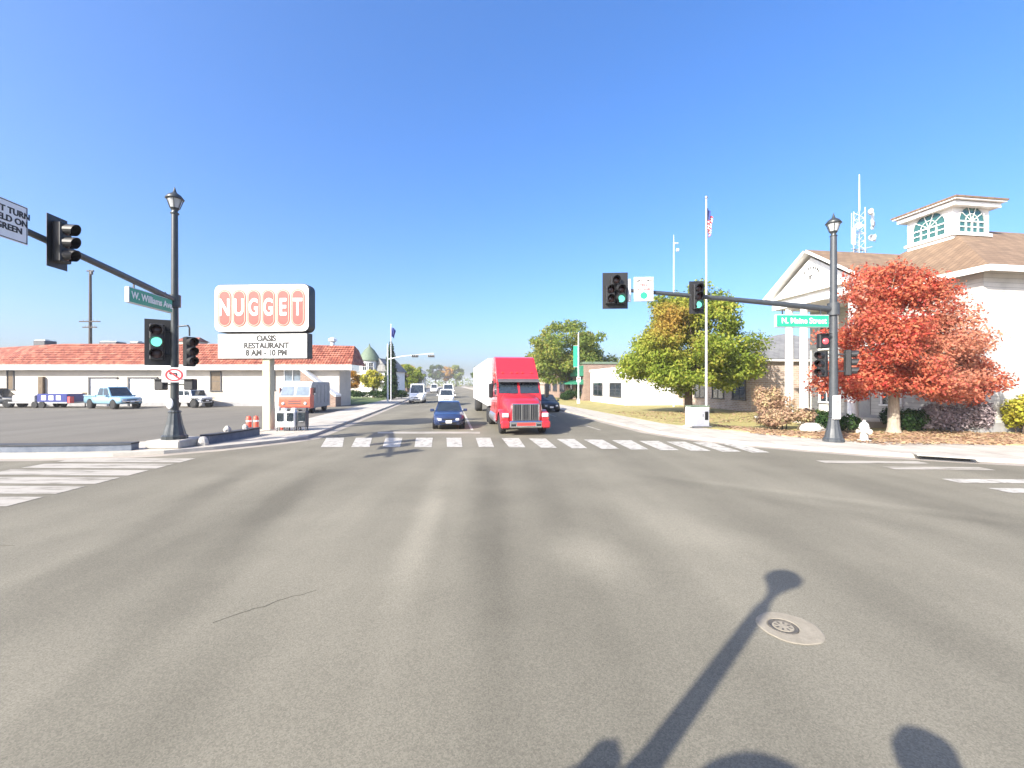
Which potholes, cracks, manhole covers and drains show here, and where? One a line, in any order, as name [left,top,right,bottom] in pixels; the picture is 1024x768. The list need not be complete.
manhole cover [756,612,826,645]
drain grate [912,453,981,463]
